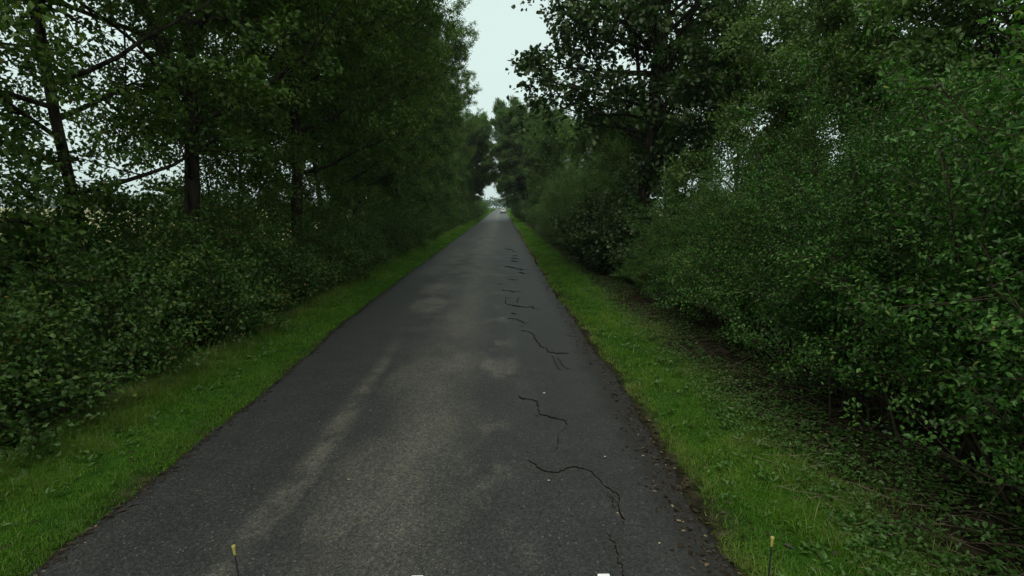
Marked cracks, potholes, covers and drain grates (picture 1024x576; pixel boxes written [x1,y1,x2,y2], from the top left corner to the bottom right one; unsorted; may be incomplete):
crack [497,258,579,370]
crack [516,394,650,576]
